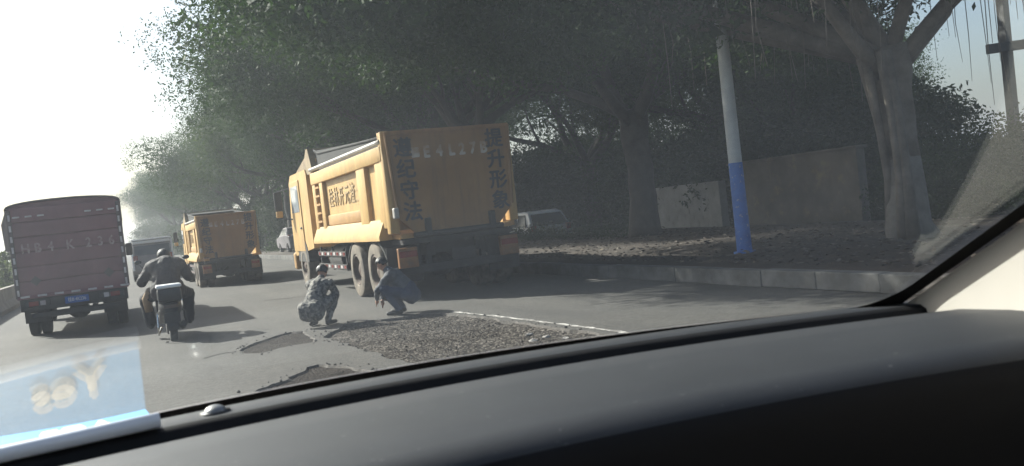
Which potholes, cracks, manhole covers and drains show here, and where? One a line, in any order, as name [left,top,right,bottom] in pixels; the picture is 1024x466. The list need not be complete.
pothole [239,331,315,353]
pothole [256,364,372,393]
